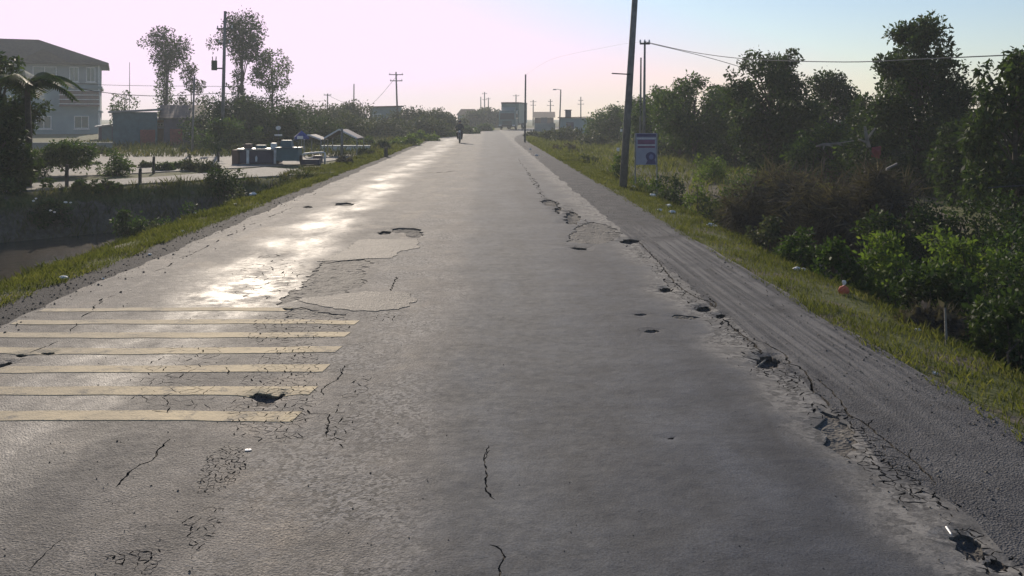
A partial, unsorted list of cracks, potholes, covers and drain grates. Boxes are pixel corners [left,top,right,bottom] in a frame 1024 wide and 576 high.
pothole [564,211,581,224]
crack [182,315,372,559]
crack [483,445,494,499]
pothole [392,228,424,238]
pothole [949,534,986,562]
crack [471,545,506,576]
pothole [249,394,285,407]
crack [116,439,170,487]
crack [622,242,1024,576]
pothole [756,356,781,369]
crack [104,548,161,575]
